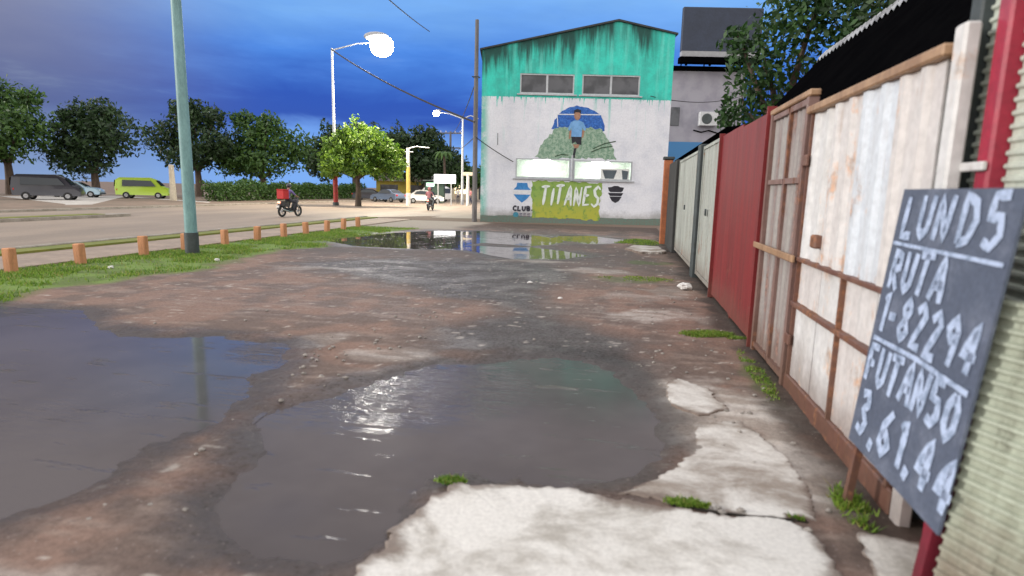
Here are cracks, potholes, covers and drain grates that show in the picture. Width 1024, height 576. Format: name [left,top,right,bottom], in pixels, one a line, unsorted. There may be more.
pothole [0,305,291,527]
pothole [326,230,590,260]
pothole [200,354,670,570]
crack [672,504,809,523]
pothole [555,236,622,244]
